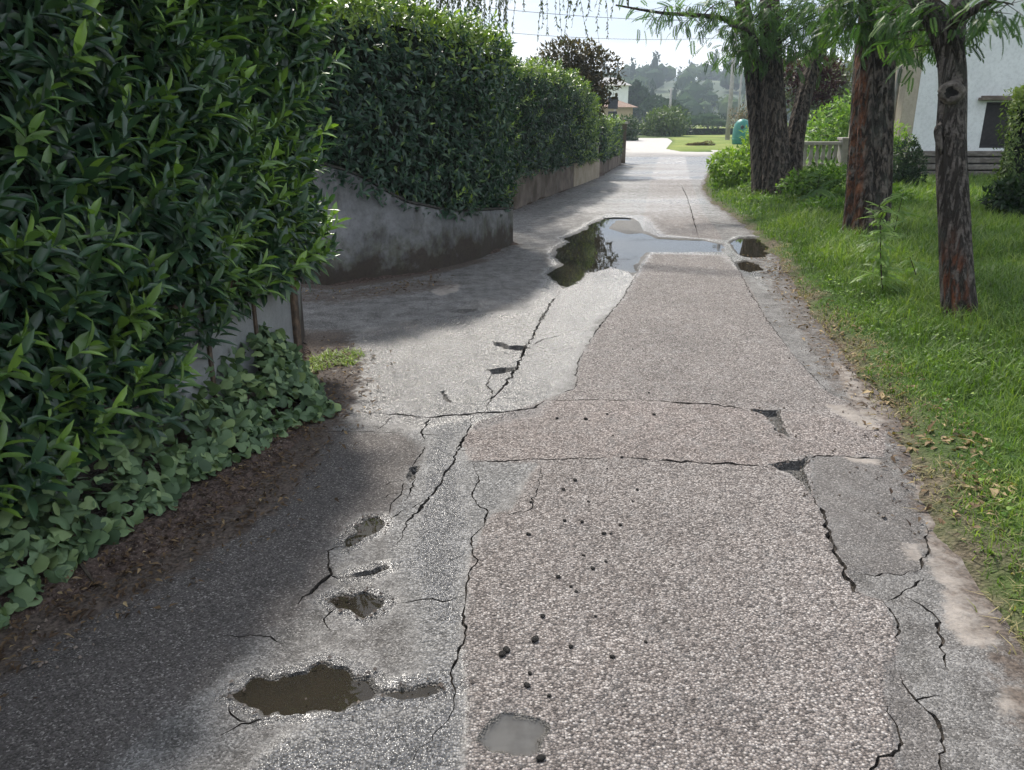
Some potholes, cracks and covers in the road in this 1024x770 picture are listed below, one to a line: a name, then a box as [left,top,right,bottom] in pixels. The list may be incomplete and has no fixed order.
pothole [344,516,385,549]
pothole [221,660,455,718]
pothole [727,236,771,258]
crack [813,497,946,770]
pothole [545,217,726,289]
pothole [735,259,766,272]
crack [297,546,344,630]
pothole [475,712,551,756]
crack [372,272,875,760]
pothole [345,564,389,578]
pothole [326,591,384,620]
